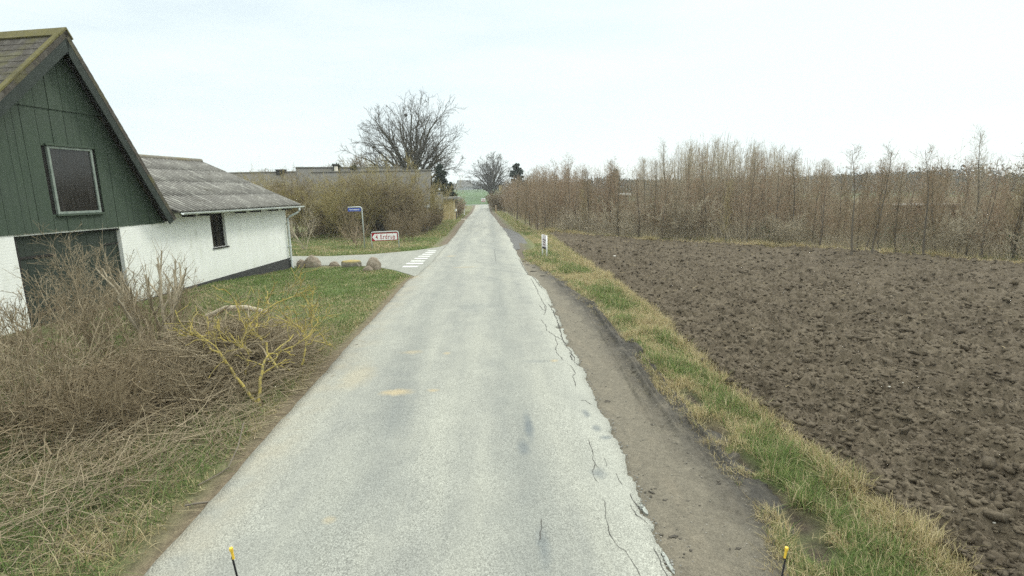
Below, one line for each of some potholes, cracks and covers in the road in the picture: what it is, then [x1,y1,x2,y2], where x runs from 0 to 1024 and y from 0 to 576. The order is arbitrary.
crack [520,261,576,386]
crack [589,441,668,576]
